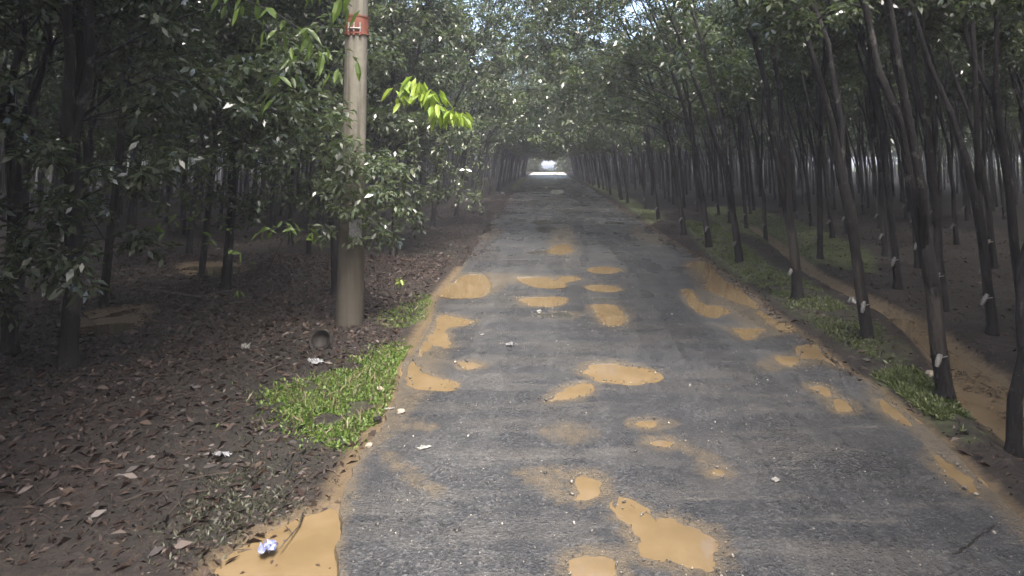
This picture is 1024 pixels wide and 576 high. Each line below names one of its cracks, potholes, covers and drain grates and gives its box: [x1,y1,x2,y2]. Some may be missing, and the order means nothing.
pothole [833,399,852,413]
pothole [514,276,581,289]
pothole [410,315,474,357]
pothole [680,289,731,318]
pothole [794,344,847,369]
pothole [610,497,719,572]
pothole [809,385,839,400]
pothole [587,266,621,274]
pothole [550,383,594,401]
pothole [686,261,763,309]
pothole [879,399,923,426]
pothole [519,296,568,307]
